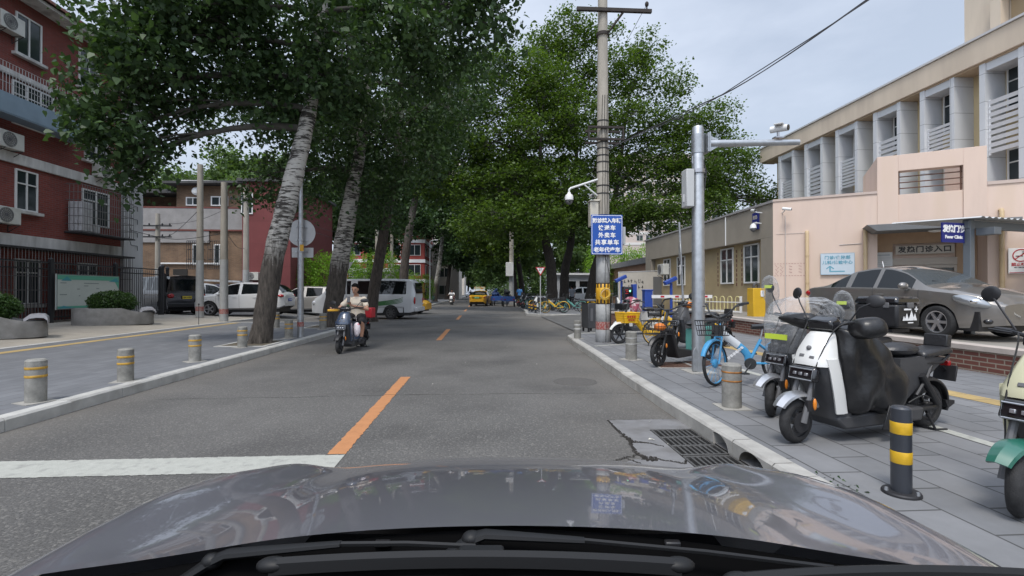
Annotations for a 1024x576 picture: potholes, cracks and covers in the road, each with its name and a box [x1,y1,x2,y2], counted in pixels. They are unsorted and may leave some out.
drain grate [682,455,747,467]
crack [607,419,687,464]
manhole cover [553,377,597,386]
drain grate [650,429,729,456]
